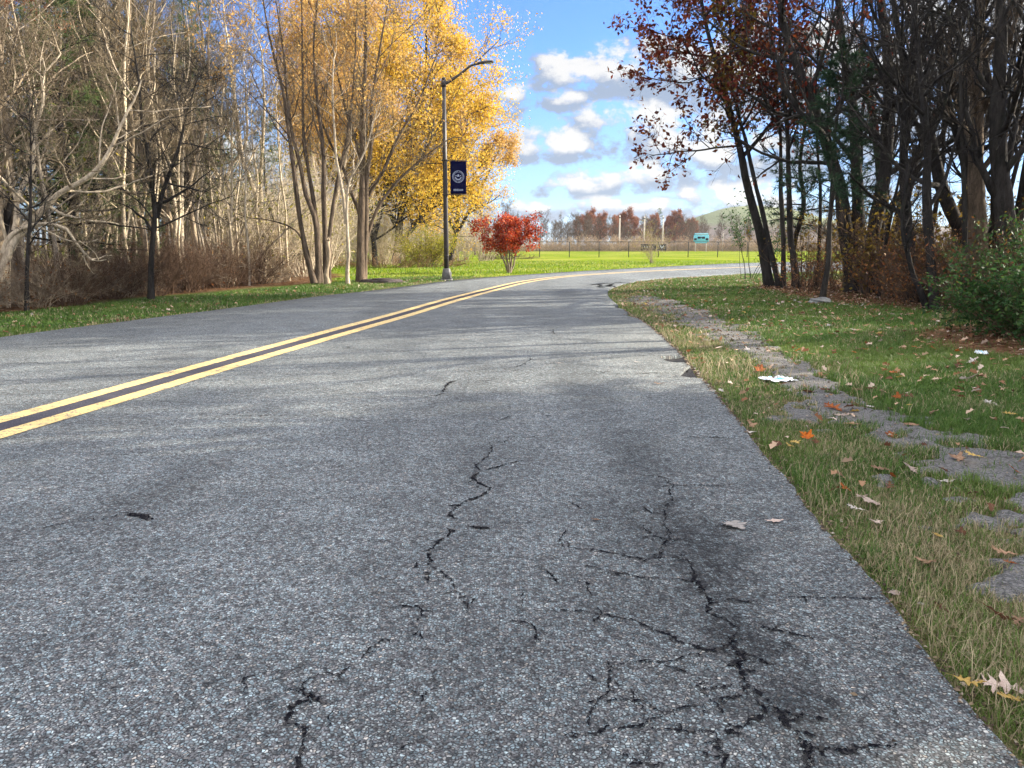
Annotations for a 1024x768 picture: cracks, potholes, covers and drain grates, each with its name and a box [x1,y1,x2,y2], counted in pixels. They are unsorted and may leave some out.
crack [557,475,897,768]
crack [400,604,431,638]
crack [413,401,541,611]
crack [283,638,390,768]
crack [510,593,541,642]
